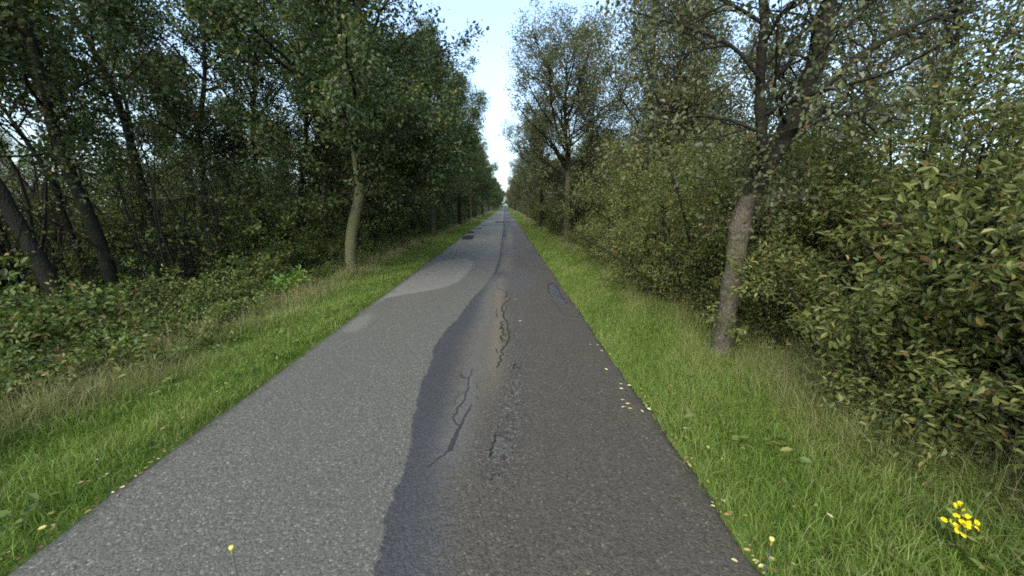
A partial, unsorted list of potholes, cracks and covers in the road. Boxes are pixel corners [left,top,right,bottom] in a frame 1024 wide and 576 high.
pothole [544,282,571,304]
crack [428,369,478,467]
crack [496,288,510,367]
